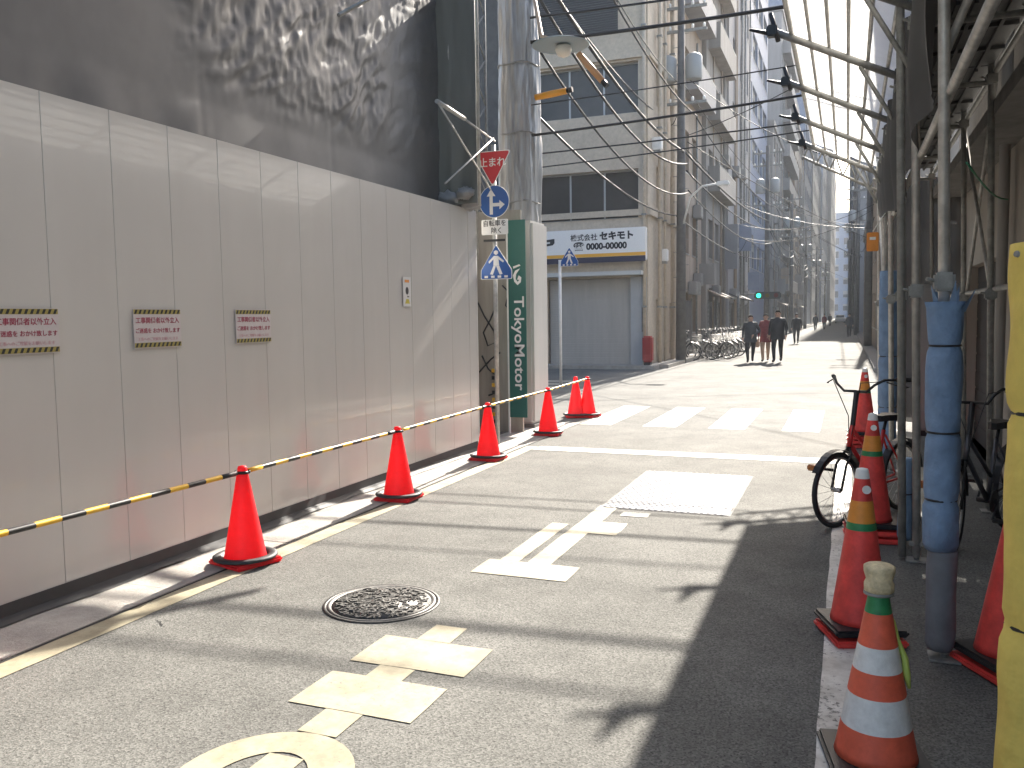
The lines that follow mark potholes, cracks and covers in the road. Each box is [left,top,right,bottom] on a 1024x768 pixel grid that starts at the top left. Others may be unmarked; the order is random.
manhole cover [322,584,440,624]
